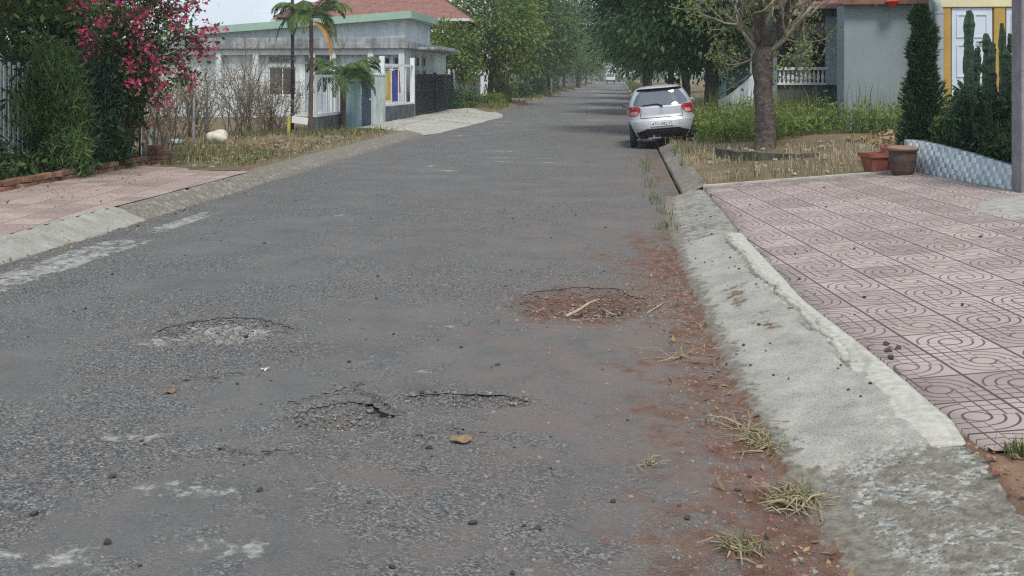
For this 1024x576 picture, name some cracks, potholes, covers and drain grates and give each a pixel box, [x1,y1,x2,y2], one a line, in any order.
pothole [406,393,529,408]
pothole [152,317,294,347]
pothole [294,400,396,431]
pothole [521,287,646,321]
